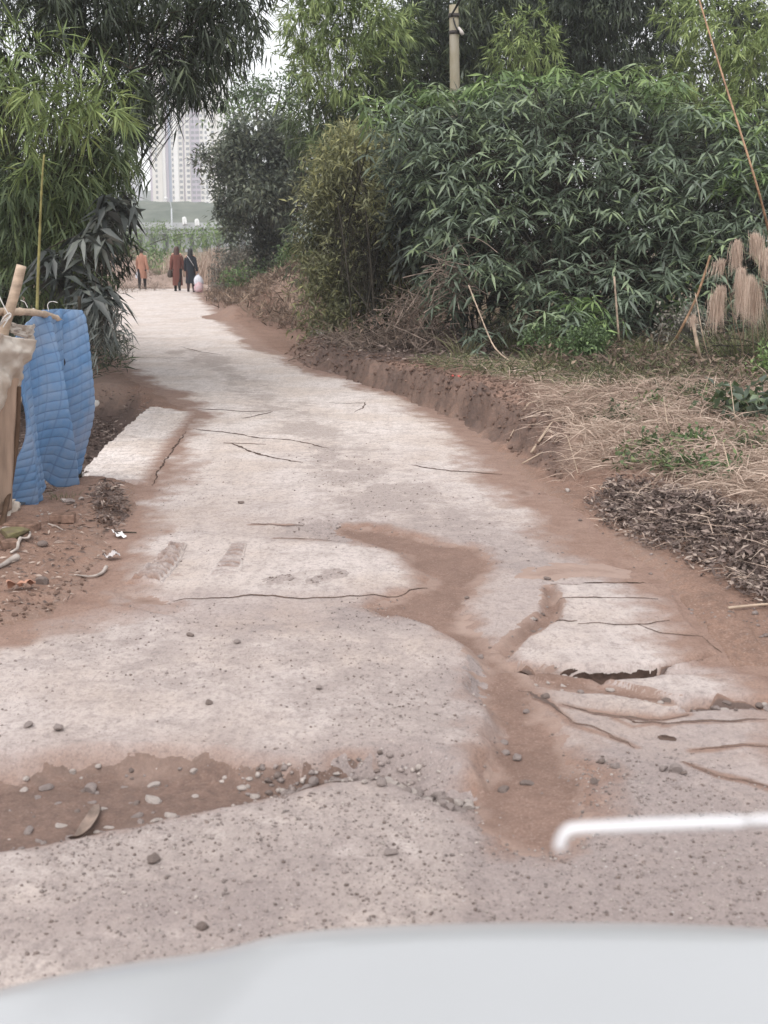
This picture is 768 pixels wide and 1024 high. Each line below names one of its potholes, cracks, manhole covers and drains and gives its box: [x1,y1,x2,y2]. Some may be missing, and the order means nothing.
crack [682,743,768,787]
crack [546,620,722,675]
crack [251,523,331,541]
crack [175,588,421,601]
crack [152,411,327,485]
pothole [0,752,358,852]
crack [518,665,765,748]
